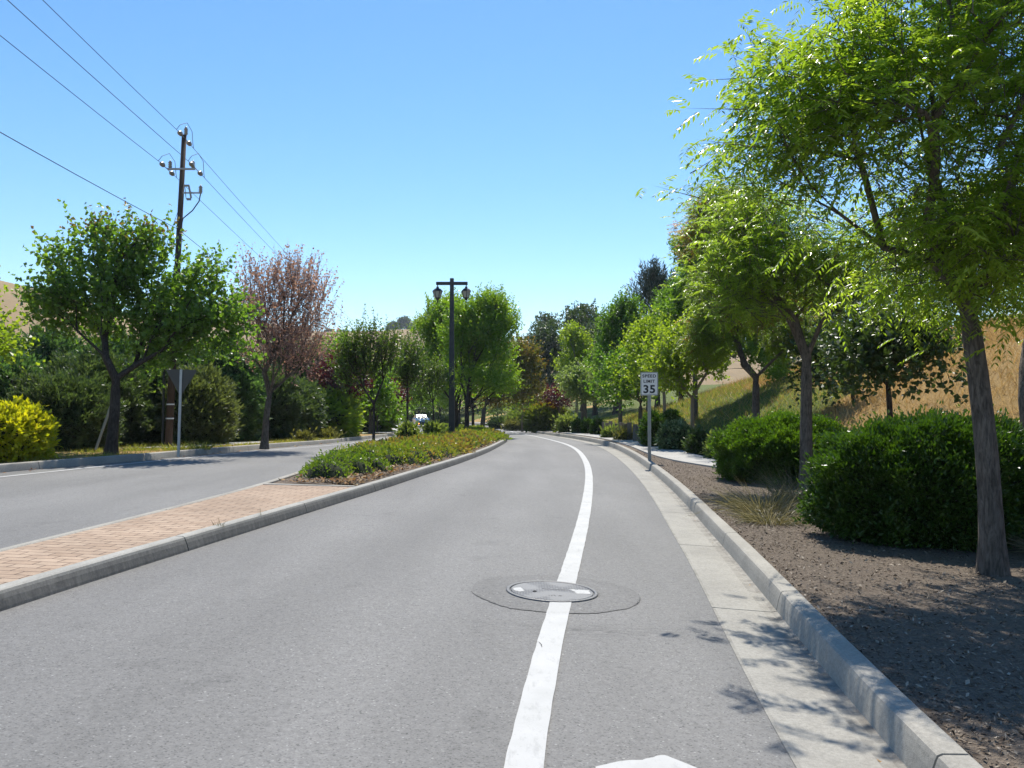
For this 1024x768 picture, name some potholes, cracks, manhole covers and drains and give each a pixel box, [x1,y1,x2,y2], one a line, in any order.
manhole cover [506,580,598,603]
